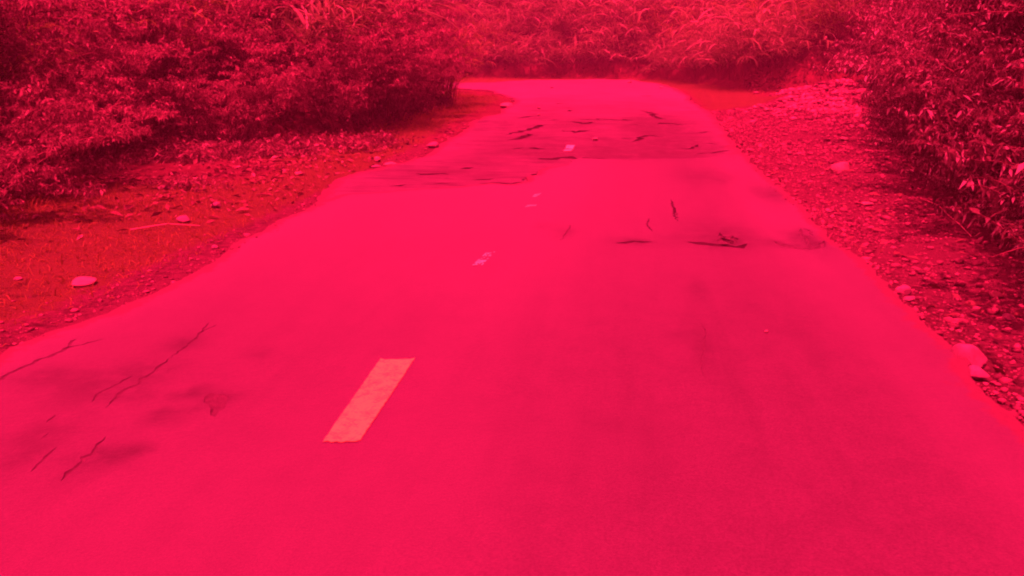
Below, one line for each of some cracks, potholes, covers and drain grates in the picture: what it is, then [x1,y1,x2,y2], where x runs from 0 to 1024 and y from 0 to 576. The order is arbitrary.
crack [396,116,602,186]
crack [646,200,679,230]
crack [31,415,105,481]
crack [556,103,683,142]
crack [0,323,216,406]
